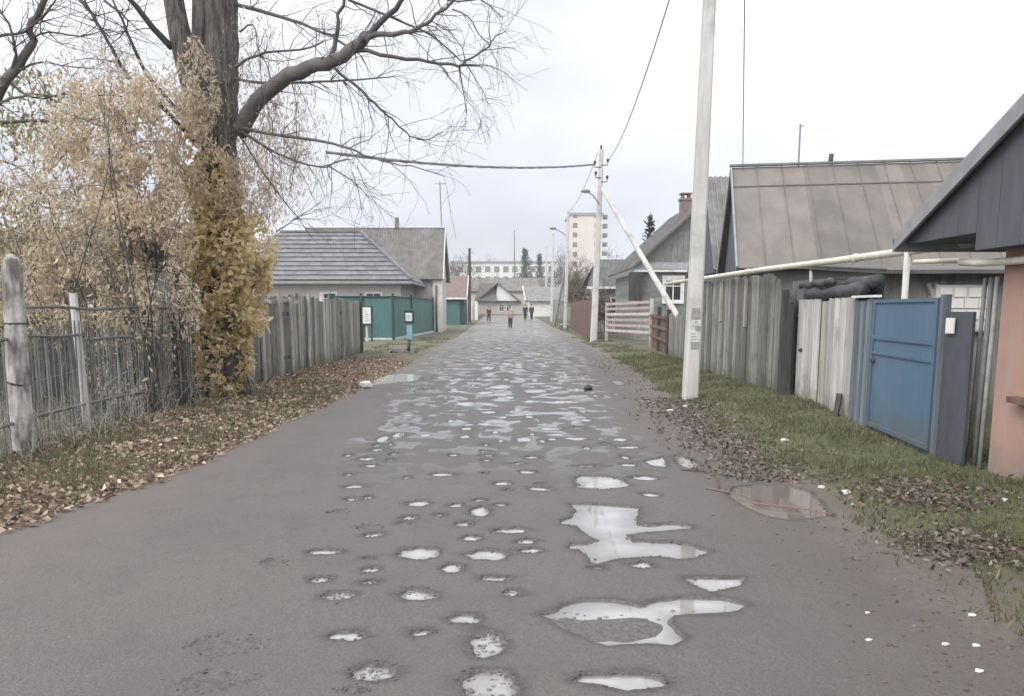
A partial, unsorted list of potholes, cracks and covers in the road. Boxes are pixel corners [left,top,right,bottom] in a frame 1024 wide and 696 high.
pothole [455,665,525,696]
pothole [574,474,632,490]
pothole [396,545,442,560]
pothole [560,503,715,564]
pothole [570,669,677,692]
pothole [643,455,668,467]
pothole [463,627,509,659]
pothole [372,373,422,385]
pothole [394,585,439,602]
pothole [335,659,403,683]
pothole [458,547,512,562]
pothole [724,484,830,520]
